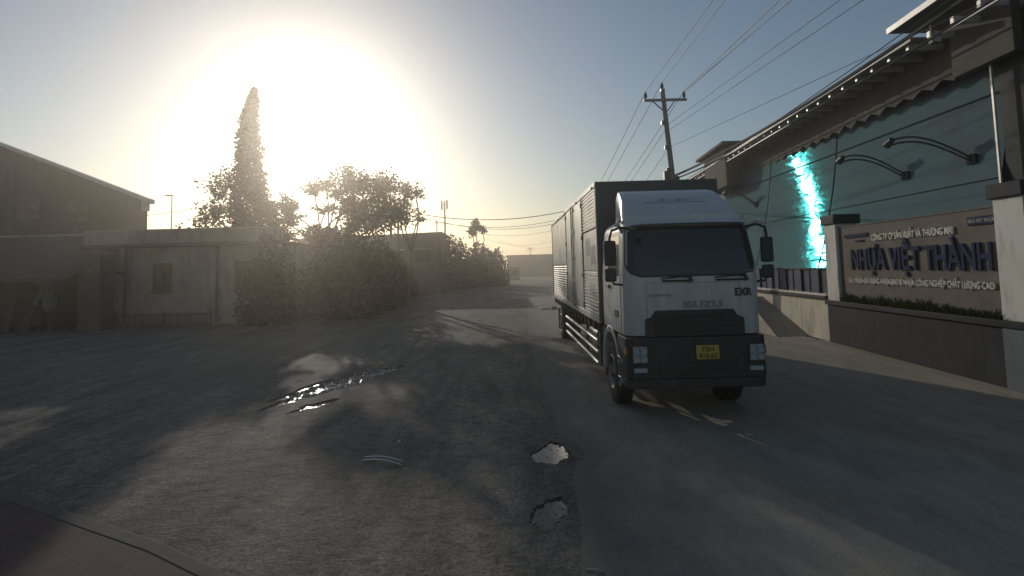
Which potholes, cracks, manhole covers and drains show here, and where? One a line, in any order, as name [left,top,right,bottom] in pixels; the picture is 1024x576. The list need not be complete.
pothole [257,364,405,412]
pothole [528,495,572,532]
pothole [530,440,571,464]
